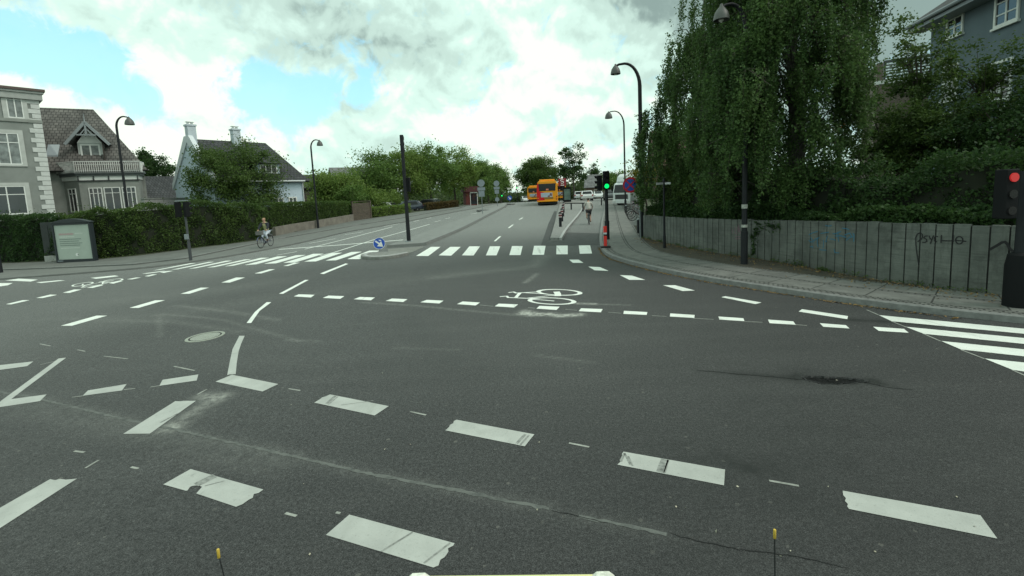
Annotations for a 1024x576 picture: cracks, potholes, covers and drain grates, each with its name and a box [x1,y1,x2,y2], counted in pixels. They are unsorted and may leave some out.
pothole [800,375,869,385]
manhole cover [185,331,225,342]
crack [552,510,844,568]
